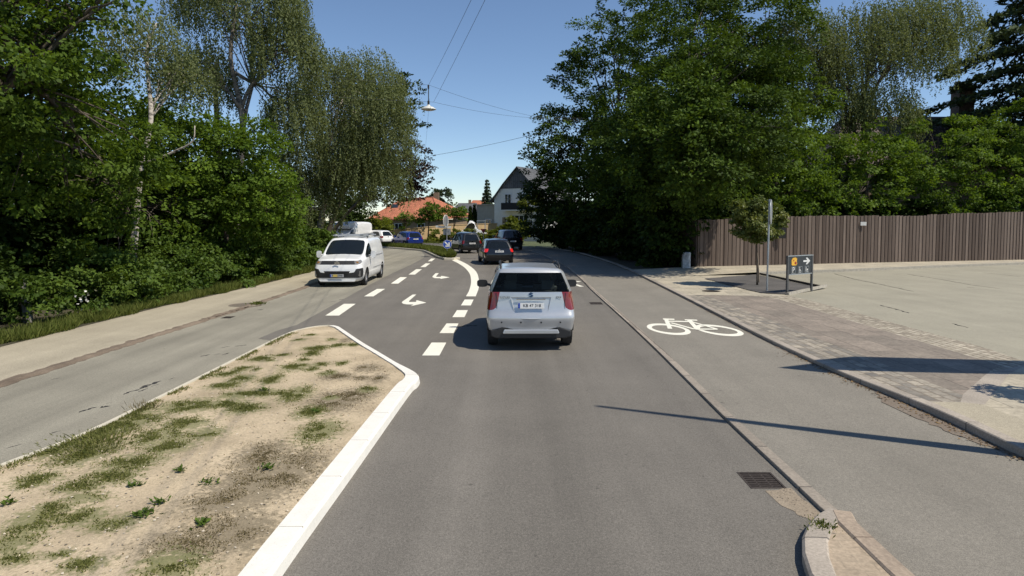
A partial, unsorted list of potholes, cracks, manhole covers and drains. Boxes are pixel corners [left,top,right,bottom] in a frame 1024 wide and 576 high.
crack [79,378,172,412]
drain grate [737,472,786,489]
